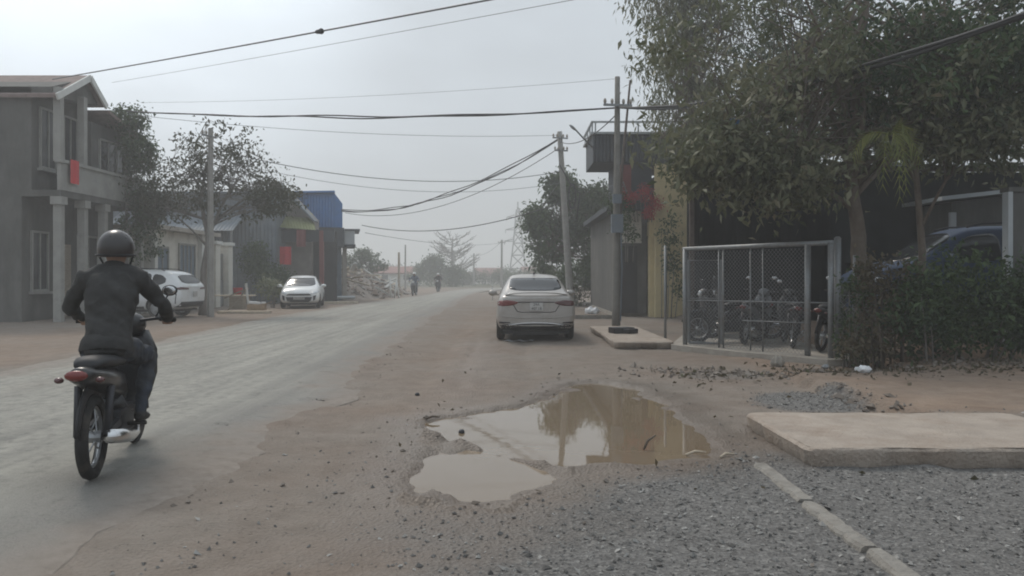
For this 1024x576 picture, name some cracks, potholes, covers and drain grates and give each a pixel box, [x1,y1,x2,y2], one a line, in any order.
pothole [393,381,738,514]
